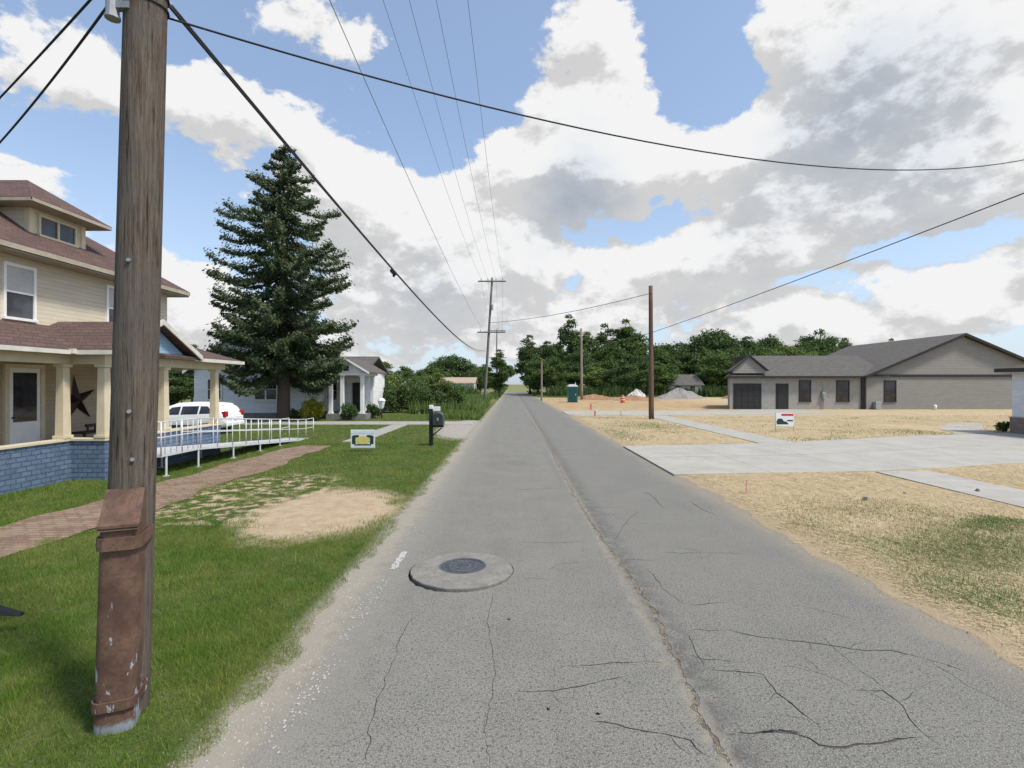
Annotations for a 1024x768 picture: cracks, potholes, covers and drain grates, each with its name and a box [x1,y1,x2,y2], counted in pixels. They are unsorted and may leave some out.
crack [476,594,496,767]
crack [595,721,710,757]
crack [687,629,967,749]
crack [345,621,410,763]
crack [515,654,659,705]
crack [611,558,726,605]
manhole cover [408,552,514,592]
